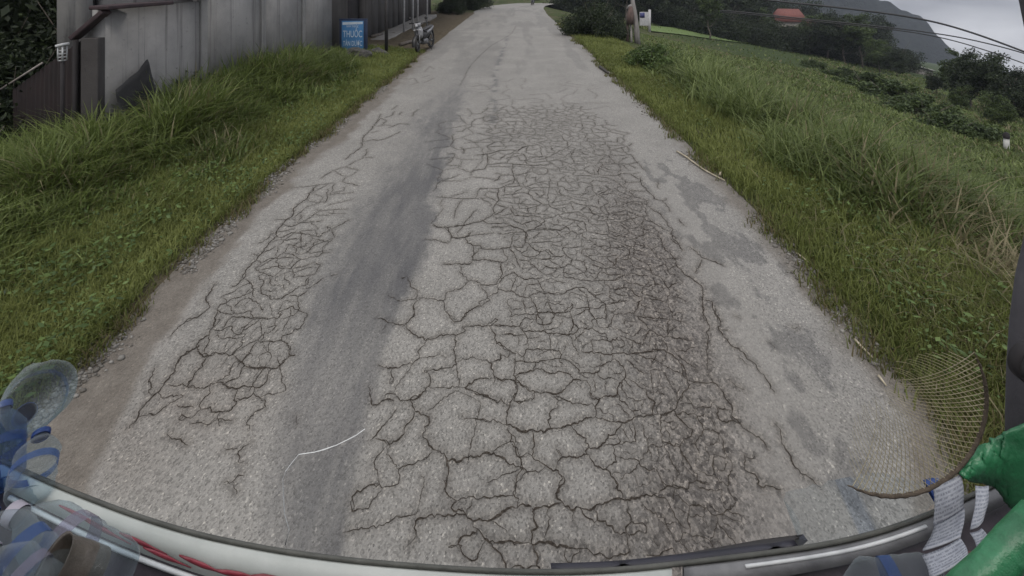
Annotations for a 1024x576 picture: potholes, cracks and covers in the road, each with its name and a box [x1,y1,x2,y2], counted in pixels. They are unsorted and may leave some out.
crack [623,151,797,391]
crack [129,161,358,445]
crack [346,83,746,569]
crack [739,423,821,490]
